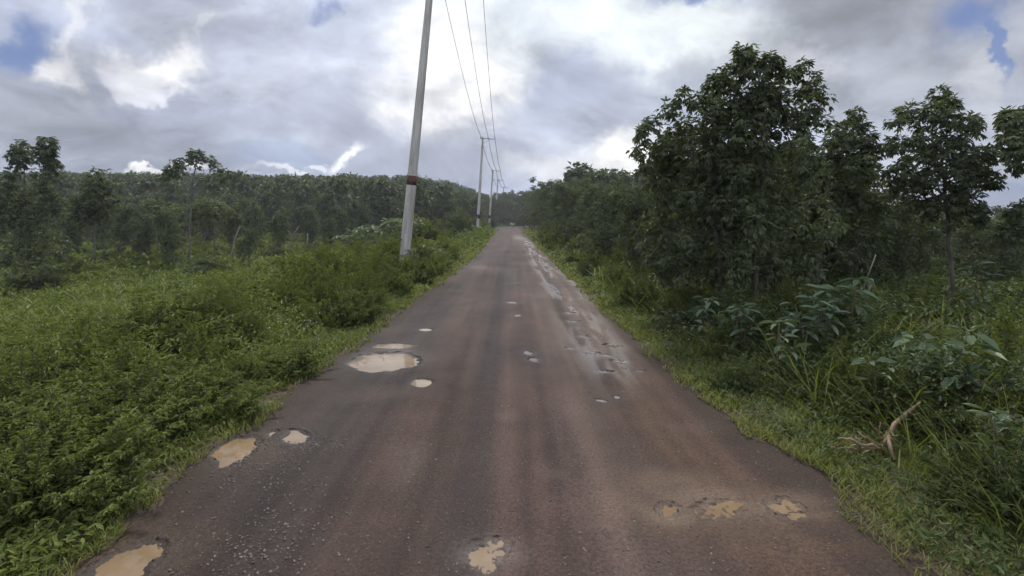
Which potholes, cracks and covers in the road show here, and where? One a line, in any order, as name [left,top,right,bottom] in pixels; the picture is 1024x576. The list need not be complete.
pothole [270,426,317,447]
pothole [202,432,270,472]
pothole [74,534,180,576]
pothole [454,531,521,576]
pothole [756,493,819,526]
pothole [405,377,438,389]
pothole [678,495,755,524]
pothole [647,498,694,522]
pothole [339,351,426,374]
pothole [368,342,417,350]
